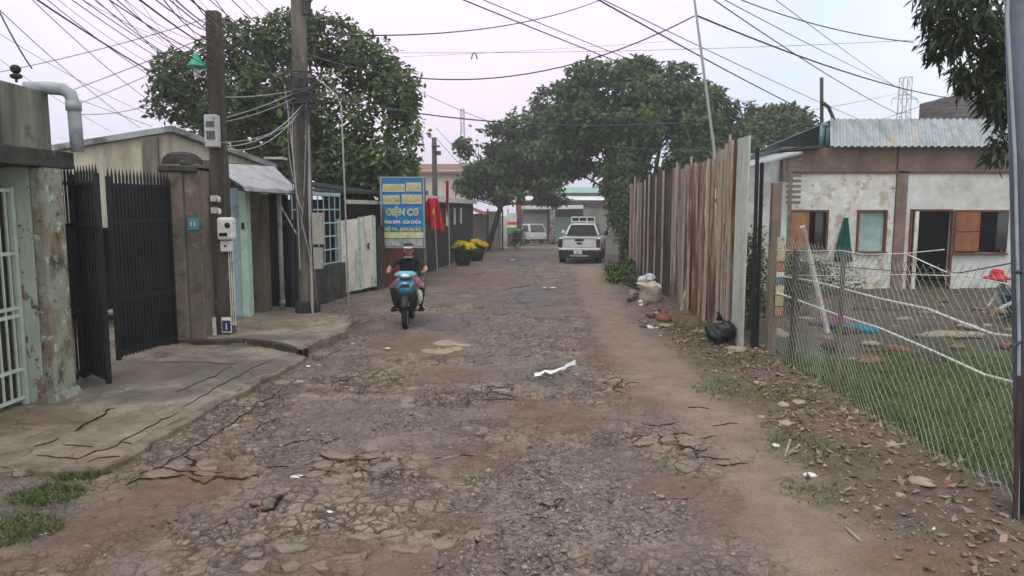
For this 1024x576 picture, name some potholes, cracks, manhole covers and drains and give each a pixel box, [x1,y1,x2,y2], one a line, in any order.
crack [482,384,518,401]
crack [628,407,748,466]
crack [597,377,638,393]
crack [125,385,379,513]
